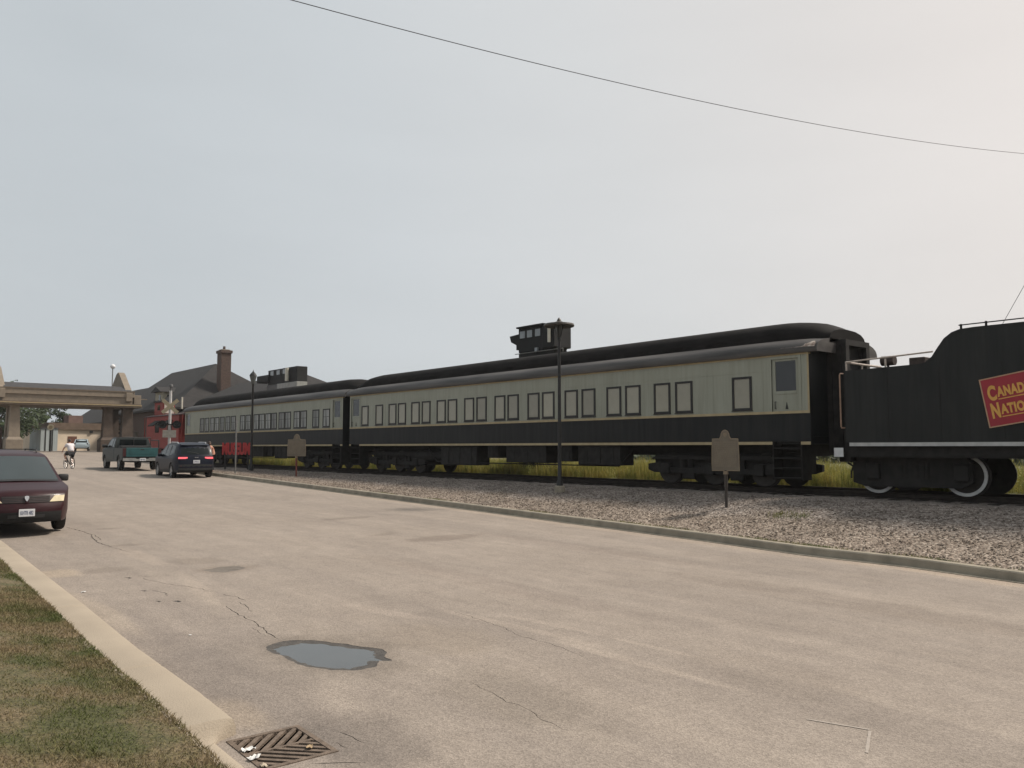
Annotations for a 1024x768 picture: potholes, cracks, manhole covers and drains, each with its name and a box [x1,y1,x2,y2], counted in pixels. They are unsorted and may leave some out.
drain grate [226,725,339,768]
crack [145,576,278,639]
pothole [266,640,392,671]
